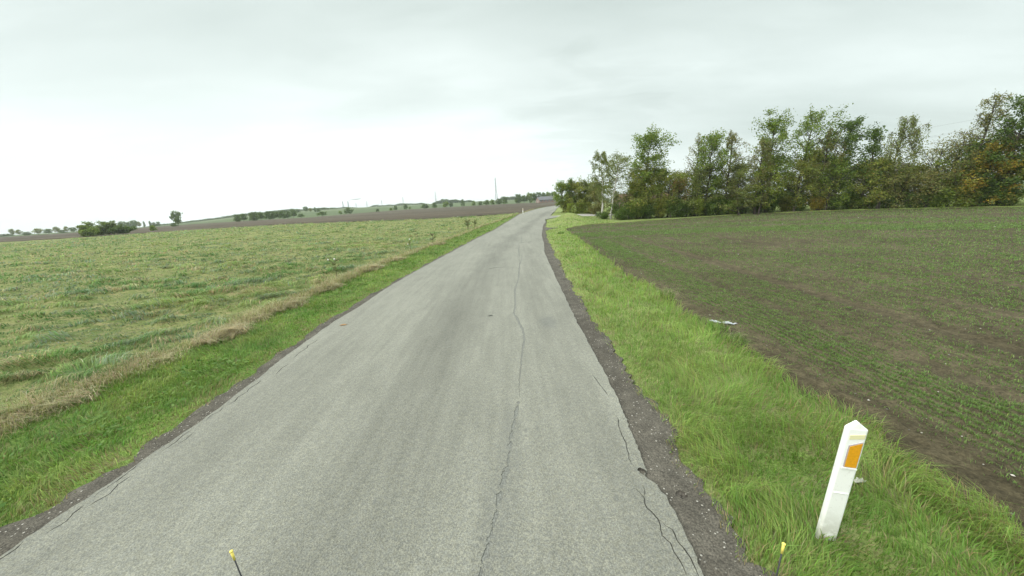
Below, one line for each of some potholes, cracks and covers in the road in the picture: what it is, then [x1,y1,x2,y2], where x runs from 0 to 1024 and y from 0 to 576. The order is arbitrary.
crack [637,486,699,576]
crack [479,237,526,576]
